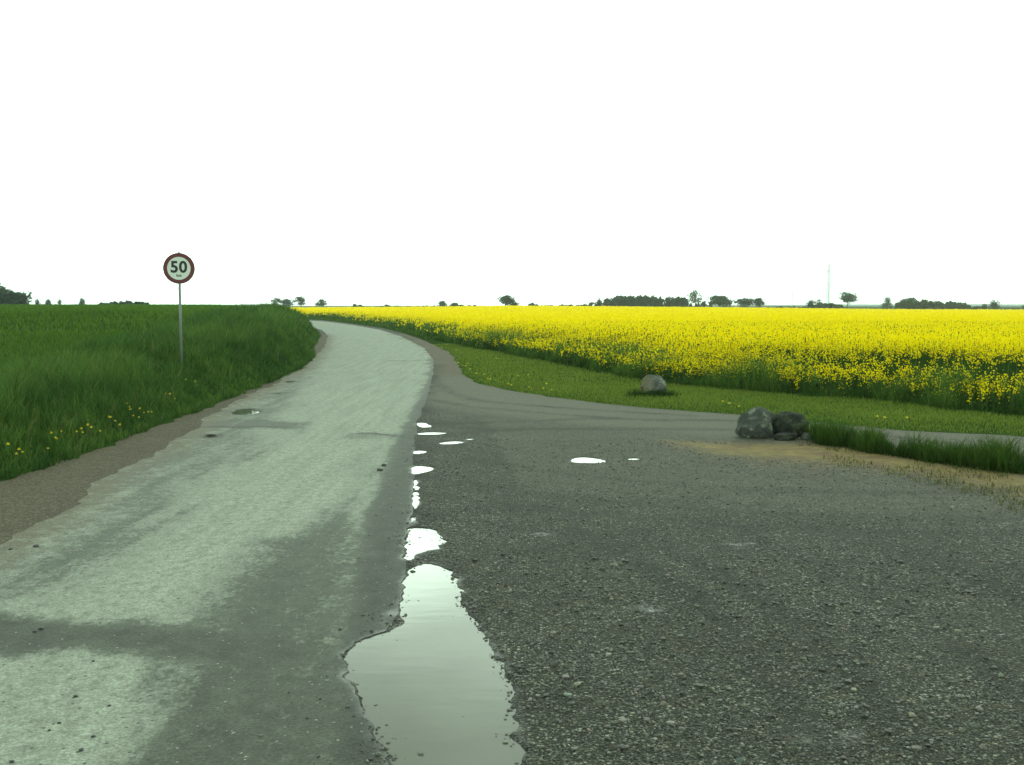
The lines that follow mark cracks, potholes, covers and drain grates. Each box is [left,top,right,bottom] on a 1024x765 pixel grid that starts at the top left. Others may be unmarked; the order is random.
pothole [341,562,530,765]
pothole [402,527,449,560]
pothole [411,465,434,474]
